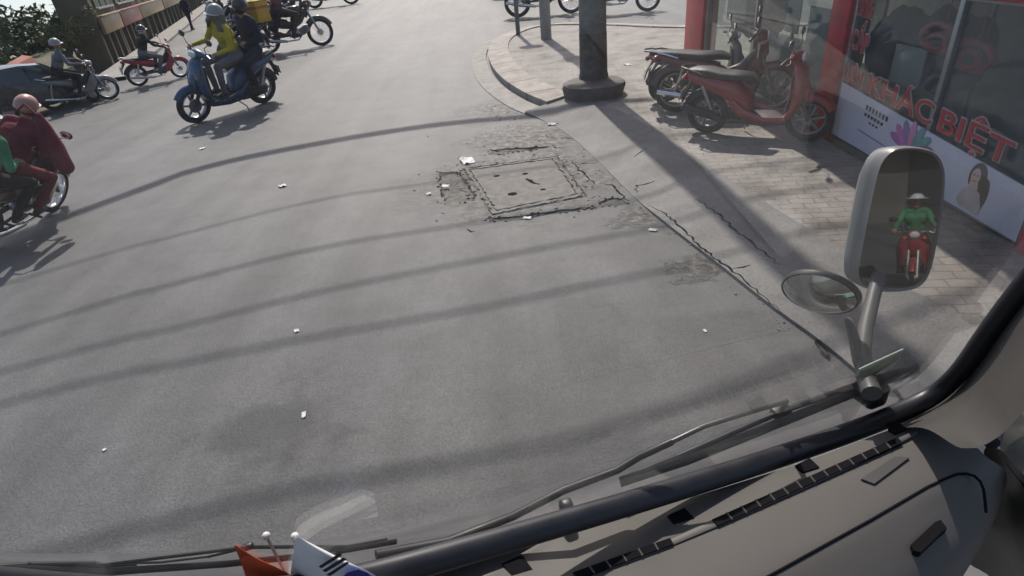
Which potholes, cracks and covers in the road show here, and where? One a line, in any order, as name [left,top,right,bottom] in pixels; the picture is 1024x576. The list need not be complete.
crack [571,160,780,310]
manhole cover [462,156,586,216]
